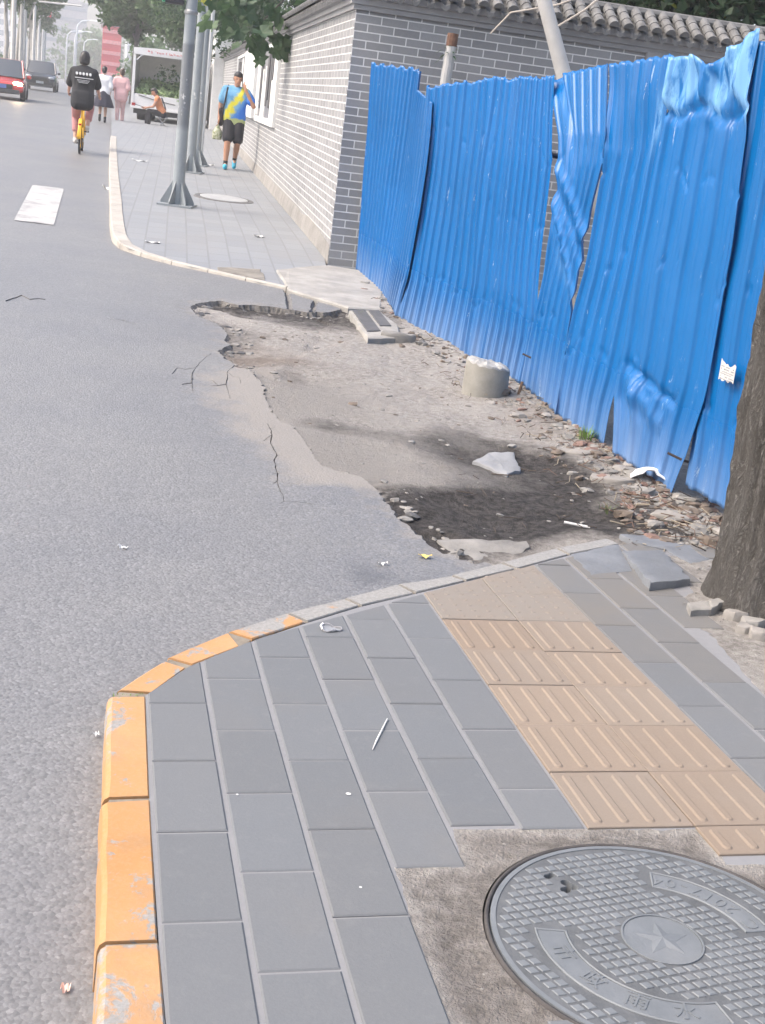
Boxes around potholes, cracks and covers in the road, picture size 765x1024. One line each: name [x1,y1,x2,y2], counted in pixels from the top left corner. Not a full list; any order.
pothole [372,430,647,564]
crack [172,357,241,396]
manhole cover [193,193,254,204]
manhole cover [482,844,765,1024]
pothole [193,304,362,389]
crack [265,427,301,503]
